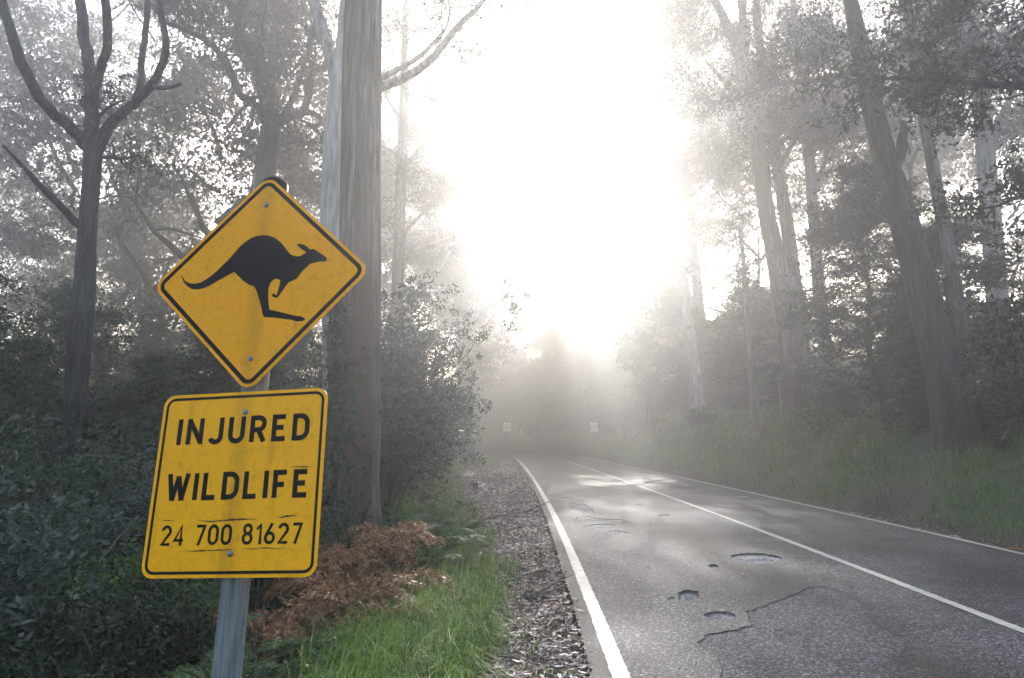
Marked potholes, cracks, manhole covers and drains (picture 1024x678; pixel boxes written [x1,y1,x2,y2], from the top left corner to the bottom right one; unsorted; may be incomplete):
pothole [697,586,906,678]
pothole [678,590,700,601]
pothole [571,504,595,515]
pothole [730,553,782,564]
pothole [576,516,623,524]
